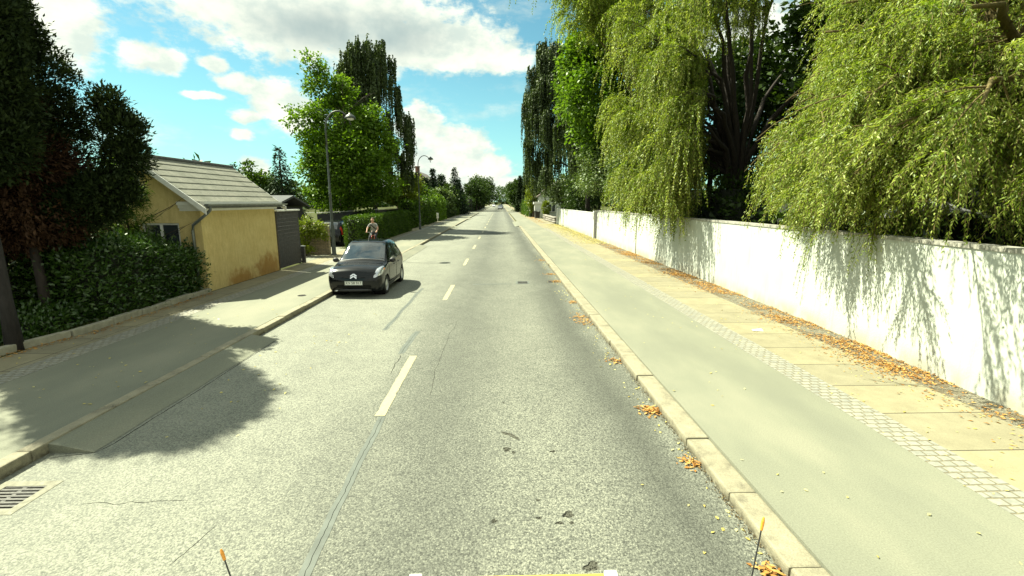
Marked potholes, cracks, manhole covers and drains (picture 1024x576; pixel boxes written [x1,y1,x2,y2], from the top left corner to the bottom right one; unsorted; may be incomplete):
pothole [582,561,600,571]
drain grate [0,481,63,515]
